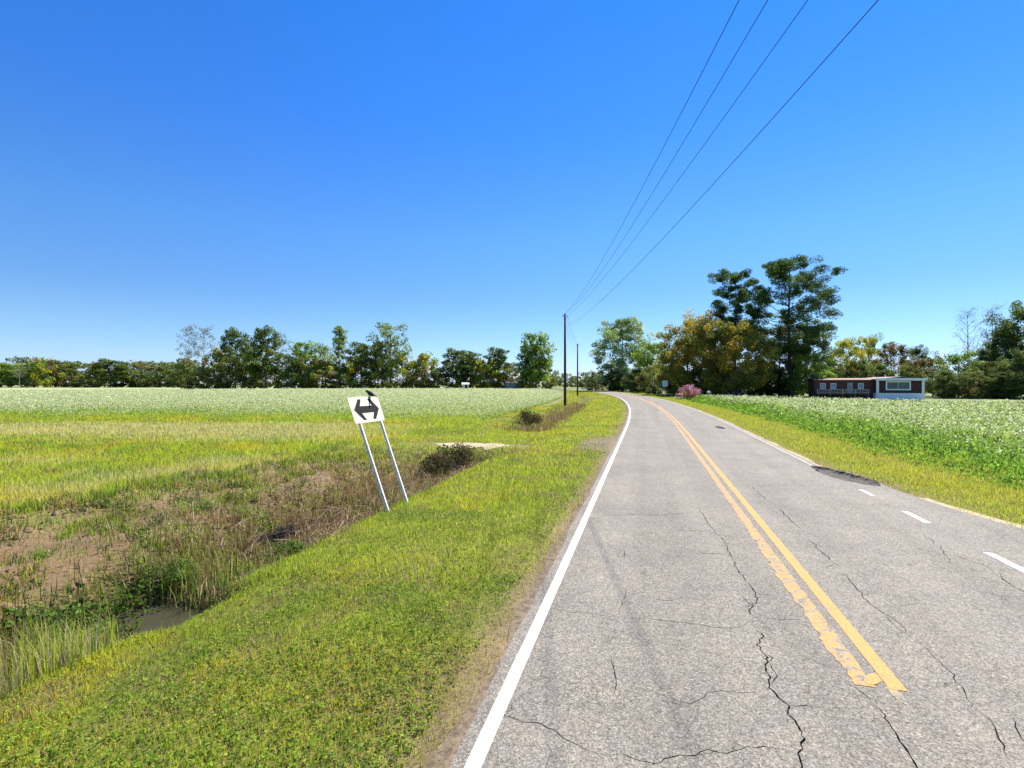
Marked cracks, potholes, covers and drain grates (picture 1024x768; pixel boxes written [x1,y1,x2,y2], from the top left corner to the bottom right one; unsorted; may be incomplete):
crack [855,687,921,768]
crack [753,488,1024,755]
crack [484,510,818,768]
